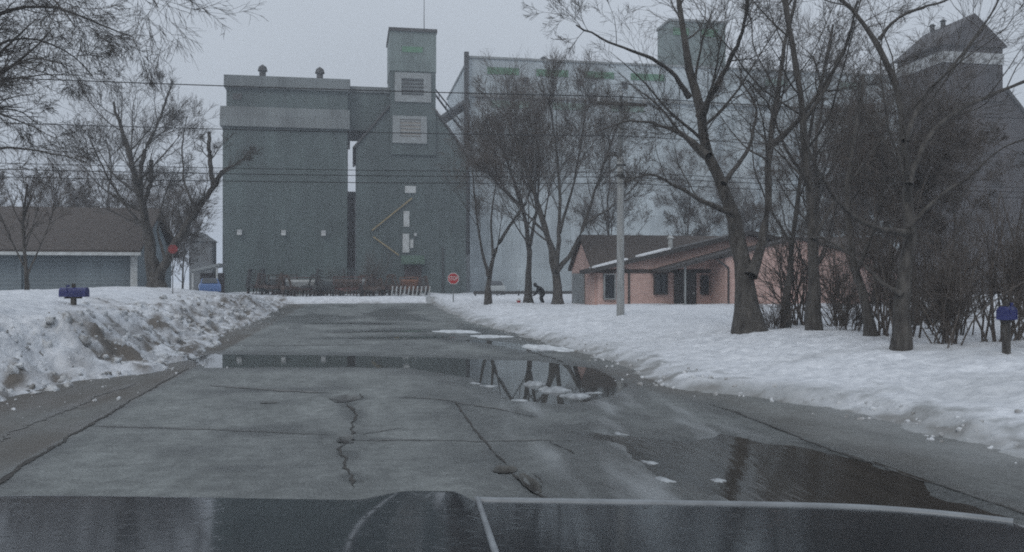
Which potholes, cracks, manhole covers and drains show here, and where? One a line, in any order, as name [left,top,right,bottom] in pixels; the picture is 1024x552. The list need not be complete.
crack [0,368,573,498]
